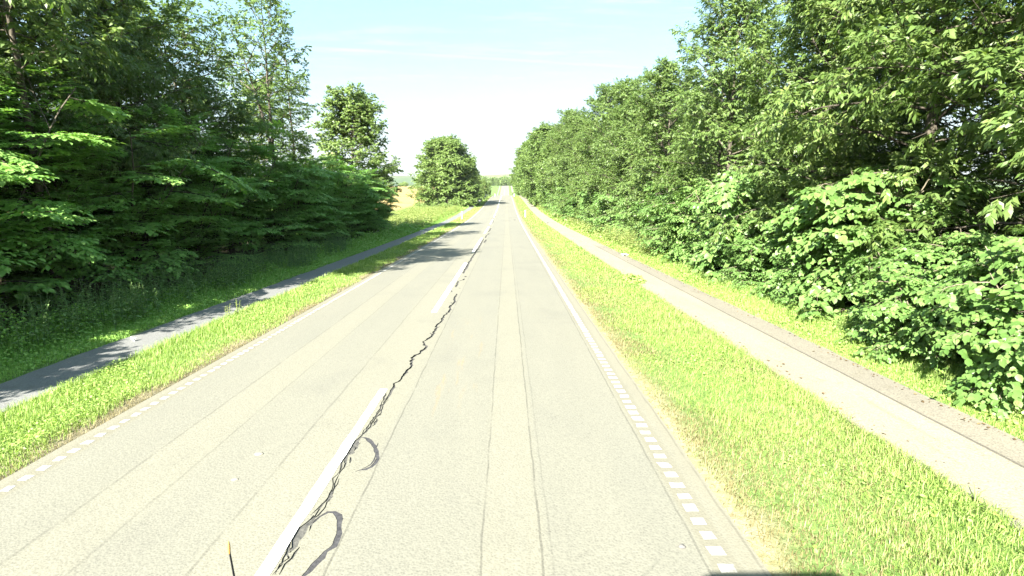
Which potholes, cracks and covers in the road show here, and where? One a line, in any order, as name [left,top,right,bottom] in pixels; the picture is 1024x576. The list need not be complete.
crack [273,219,494,576]
